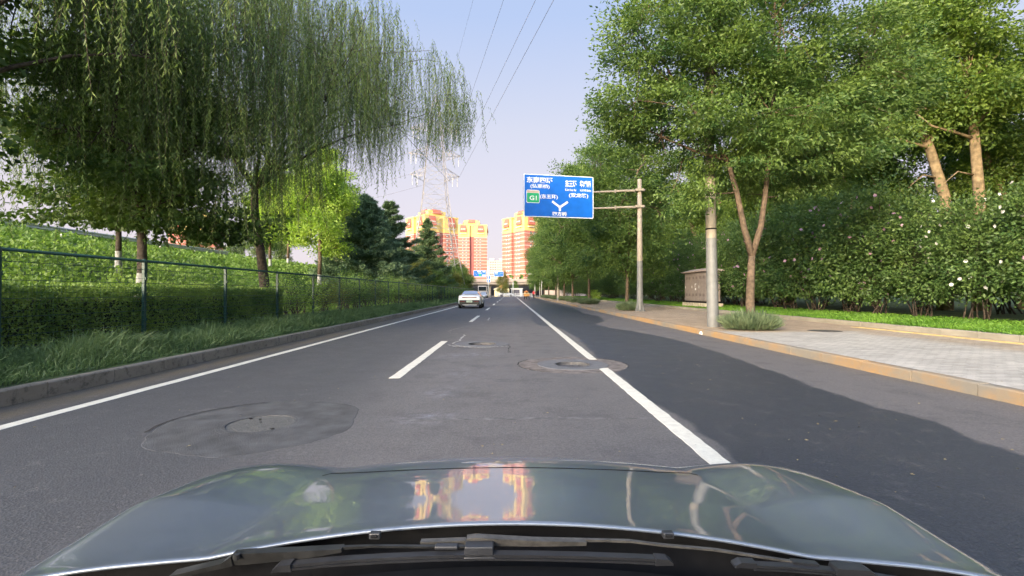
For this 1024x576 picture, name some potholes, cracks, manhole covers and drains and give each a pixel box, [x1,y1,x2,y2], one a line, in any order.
manhole cover [519,357,628,374]
manhole cover [141,401,359,458]
